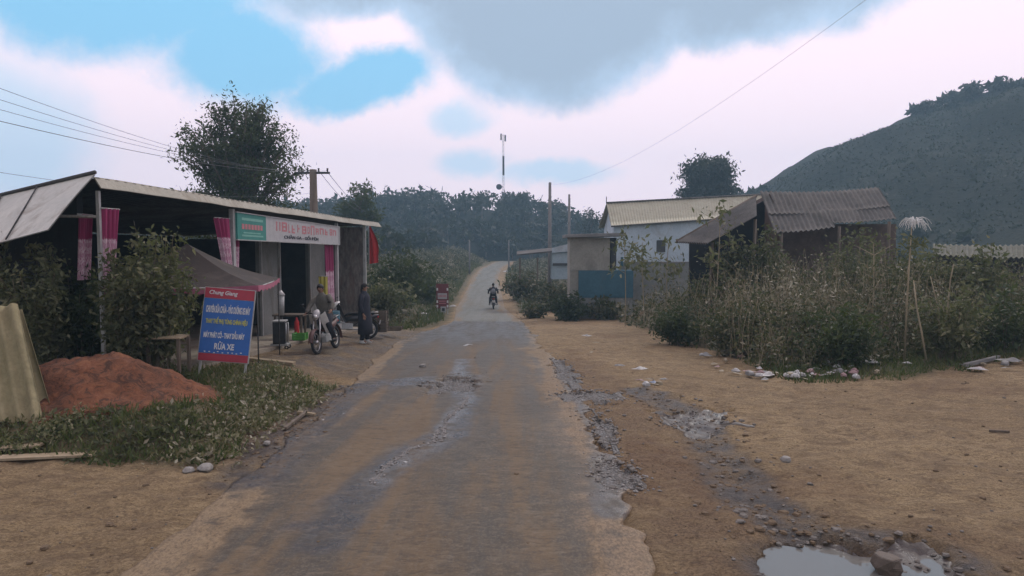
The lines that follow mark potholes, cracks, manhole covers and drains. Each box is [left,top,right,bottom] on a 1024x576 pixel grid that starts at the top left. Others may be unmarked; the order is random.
pothole [640,406,757,440]
pothole [541,385,638,408]
pothole [588,404,624,457]
pothole [546,353,601,408]
pothole [397,371,485,398]
crack [369,396,469,484]
pothole [578,452,662,497]
pothole [724,525,975,576]
